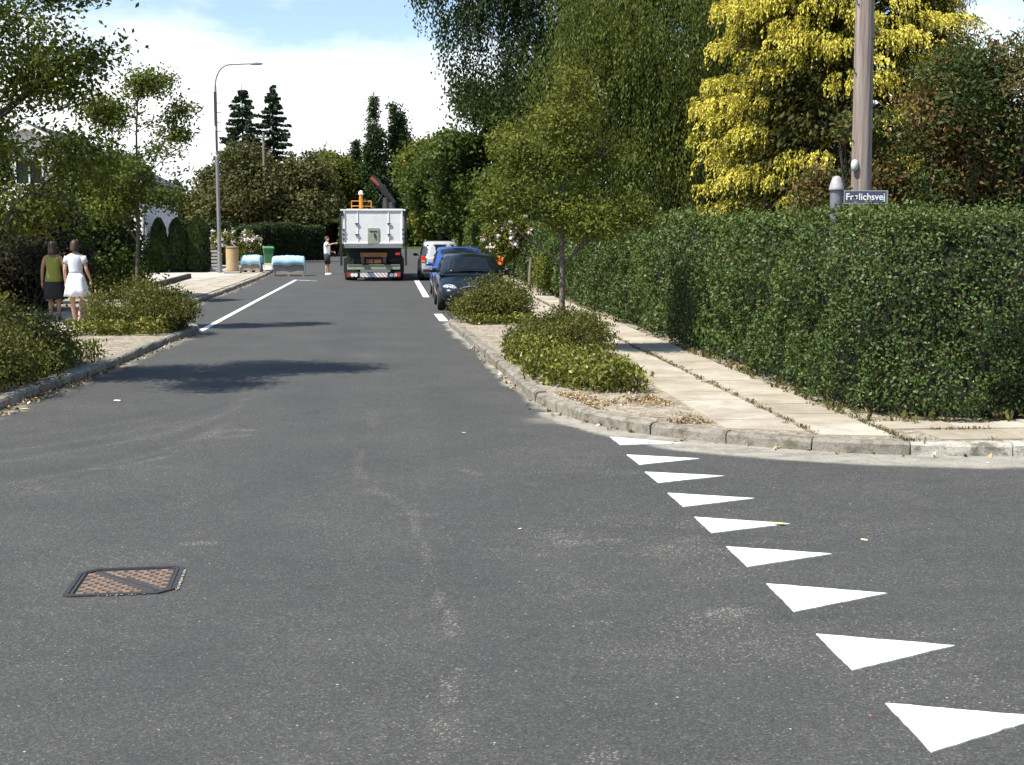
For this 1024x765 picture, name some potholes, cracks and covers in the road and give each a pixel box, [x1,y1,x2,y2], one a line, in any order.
manhole cover [63,565,186,598]
